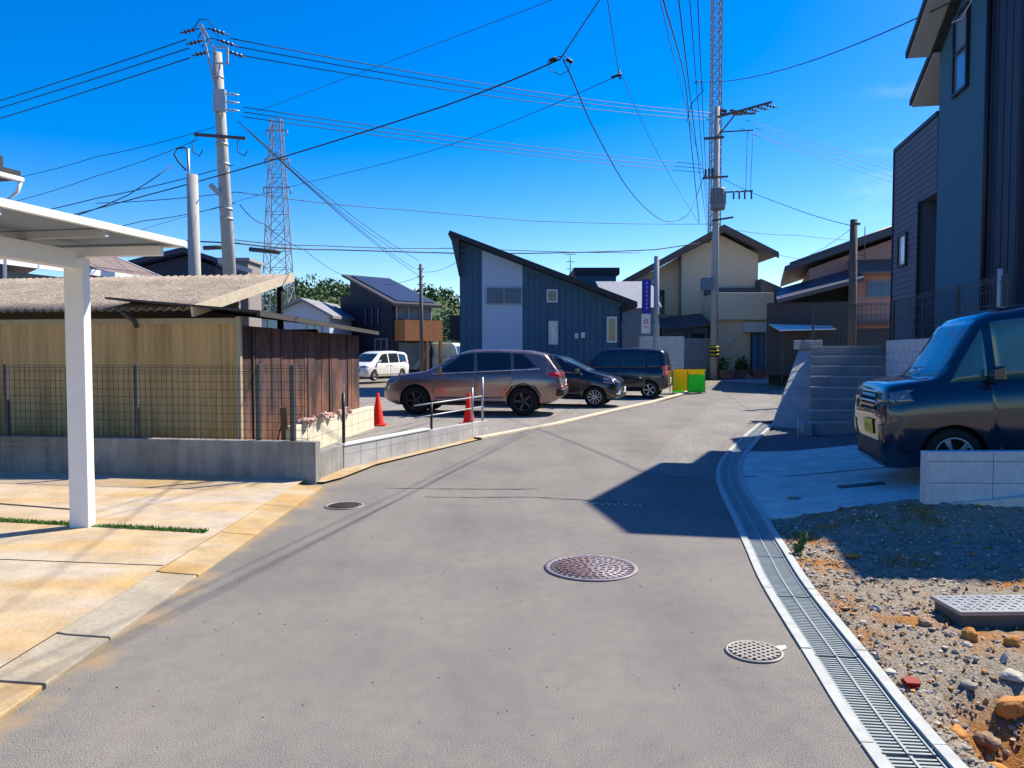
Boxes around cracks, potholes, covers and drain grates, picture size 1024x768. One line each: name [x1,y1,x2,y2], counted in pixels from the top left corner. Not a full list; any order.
manhole cover [725,640,787,664]
manhole cover [325,501,364,510]
manhole cover [544,554,638,582]
